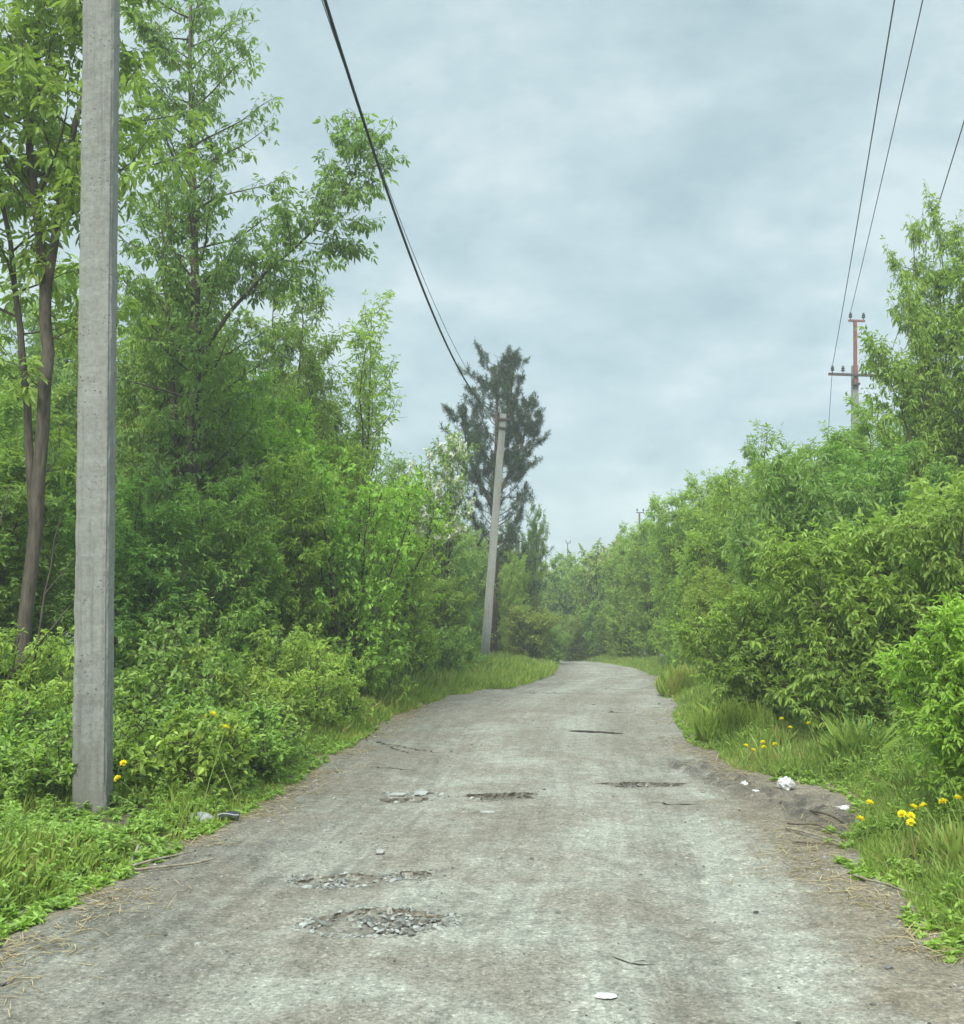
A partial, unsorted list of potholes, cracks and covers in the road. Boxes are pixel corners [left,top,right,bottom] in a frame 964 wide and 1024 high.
pothole [464,792,534,801]
crack [366,739,446,771]
pothole [294,871,432,887]
pothole [308,906,446,936]
